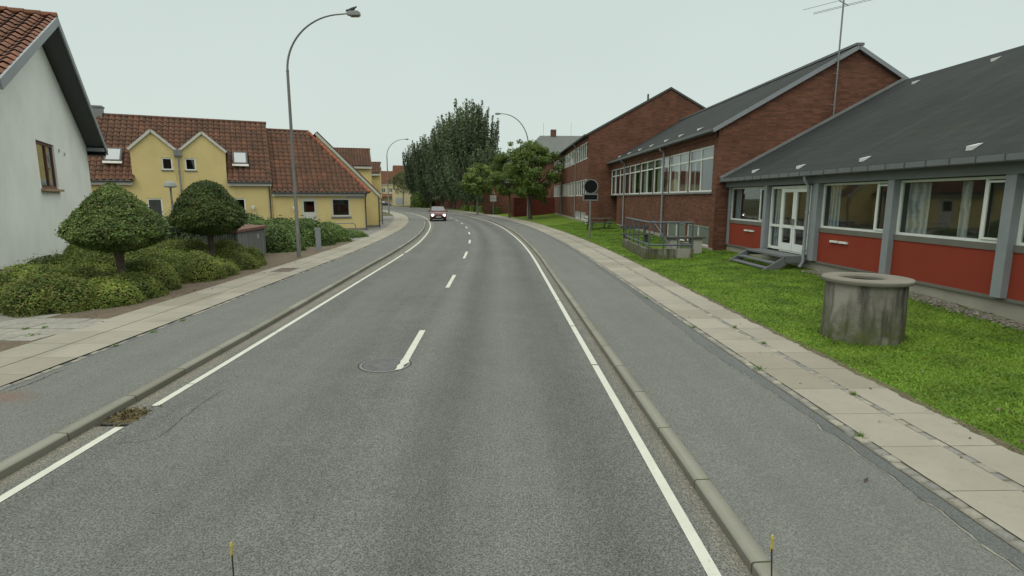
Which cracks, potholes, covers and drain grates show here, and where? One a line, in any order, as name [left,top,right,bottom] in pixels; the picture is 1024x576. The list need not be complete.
manhole cover [358,357,412,373]
